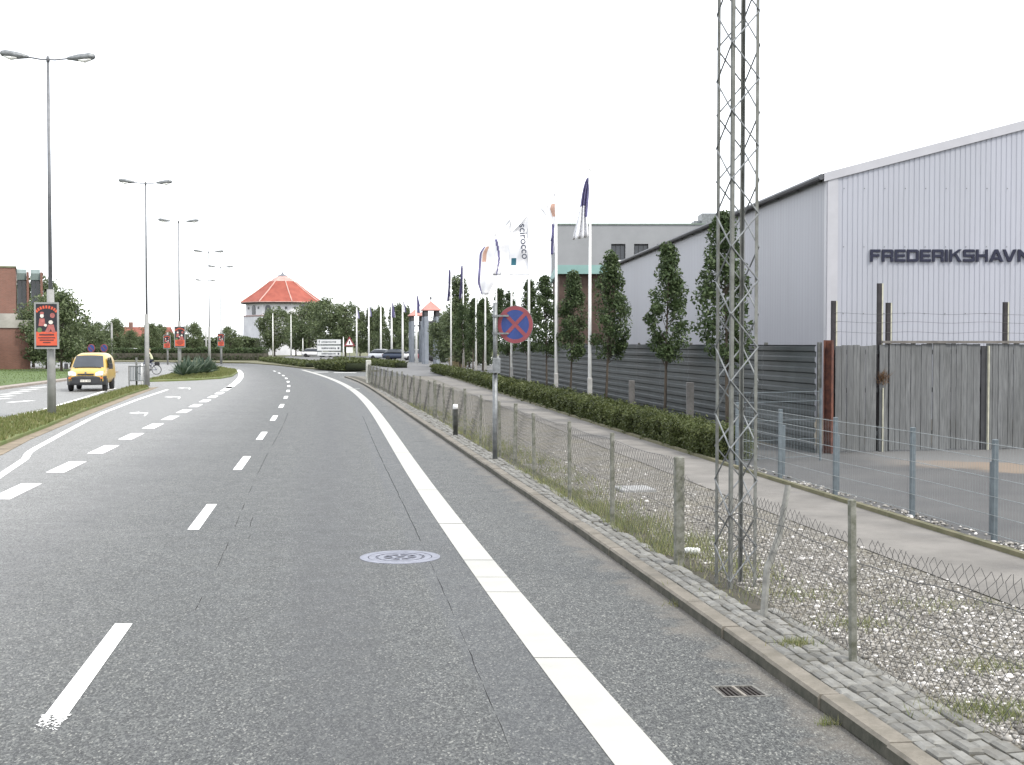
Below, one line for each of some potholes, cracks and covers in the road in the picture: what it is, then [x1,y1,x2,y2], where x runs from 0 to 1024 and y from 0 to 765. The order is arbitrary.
drain grate [710,685,770,698]
crack [365,422,511,751]
manhole cover [360,550,440,564]
crack [195,414,288,610]
